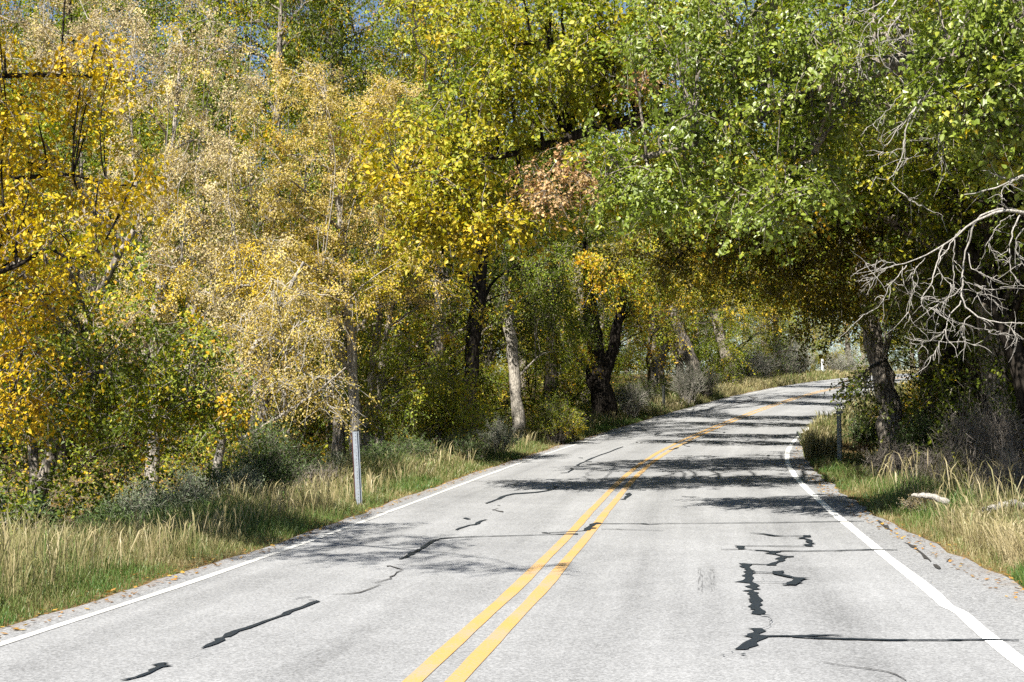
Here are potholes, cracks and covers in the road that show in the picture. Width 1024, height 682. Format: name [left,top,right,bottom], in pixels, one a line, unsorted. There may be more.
crack [878,520,951,569]
crack [341,565,401,594]
